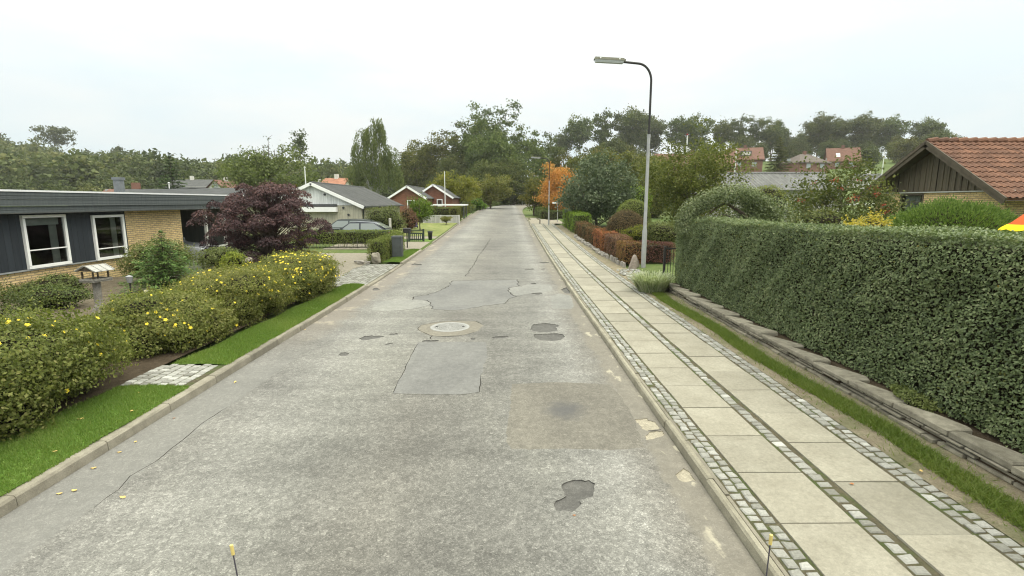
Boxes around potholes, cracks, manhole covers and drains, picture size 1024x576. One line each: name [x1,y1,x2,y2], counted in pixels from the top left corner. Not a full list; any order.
manhole cover [430,322,470,332]
pothole [534,333,565,341]
pothole [530,323,558,332]
crack [351,243,519,395]
crack [94,409,224,508]
pothole [554,480,595,512]
